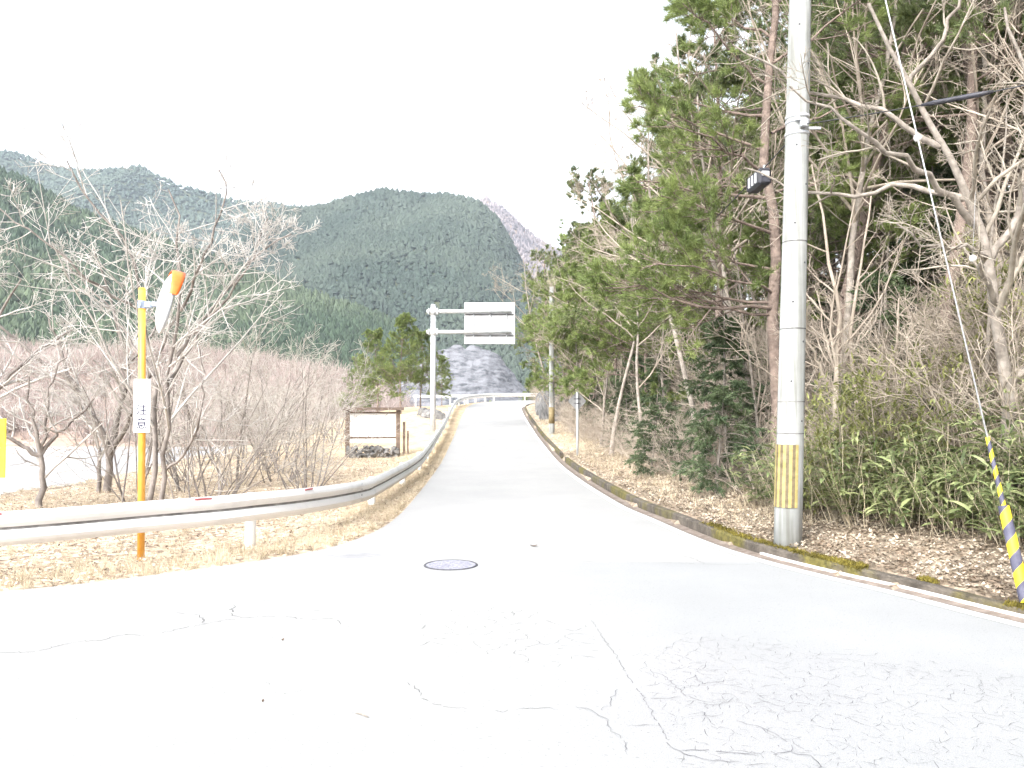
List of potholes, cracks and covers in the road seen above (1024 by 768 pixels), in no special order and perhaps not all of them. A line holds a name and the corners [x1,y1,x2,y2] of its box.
crack [414,607,1024,768]
manhole cover [424,559,478,570]
crack [0,600,341,653]
